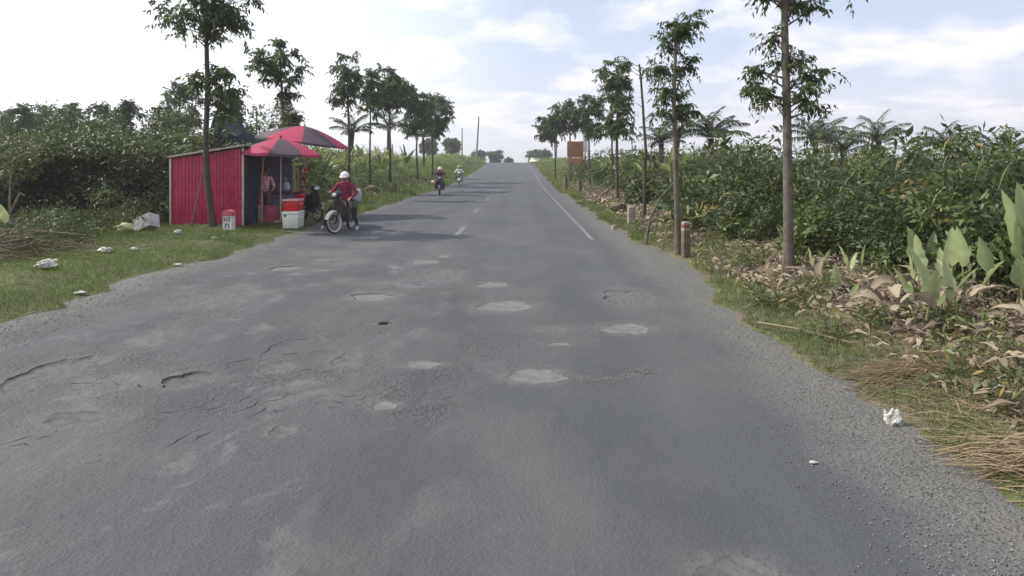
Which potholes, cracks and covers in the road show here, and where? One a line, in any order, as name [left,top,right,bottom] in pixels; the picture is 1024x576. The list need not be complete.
pothole [161,371,215,388]
crack [162,397,217,446]
crack [584,368,656,380]
pothole [329,349,362,367]
pothole [371,400,397,411]
pothole [0,355,99,393]
pothole [505,368,570,383]
pothole [475,300,533,312]
pothole [602,290,657,307]
pothole [691,555,780,576]
pothole [41,411,124,427]
pothole [597,323,650,334]
